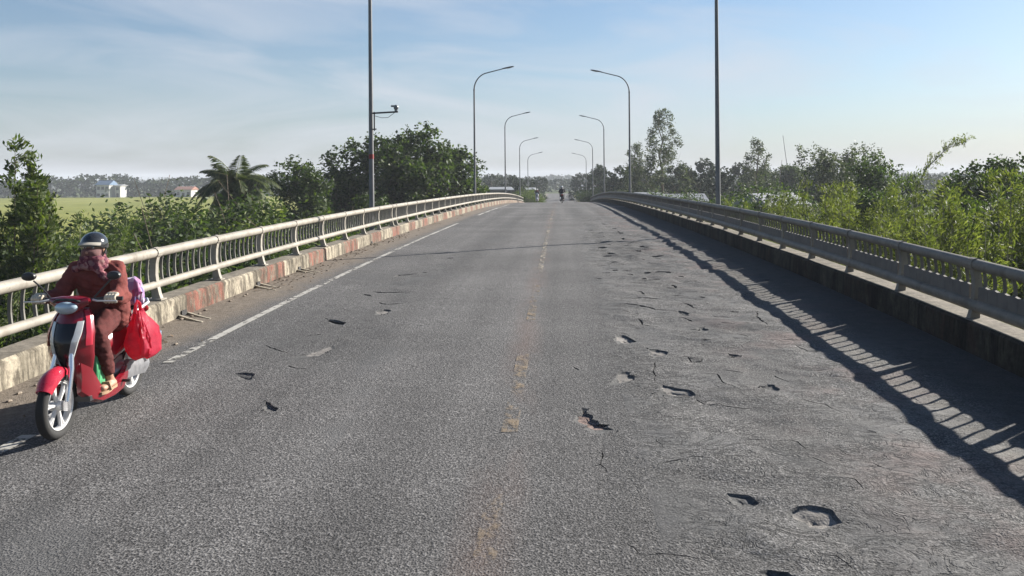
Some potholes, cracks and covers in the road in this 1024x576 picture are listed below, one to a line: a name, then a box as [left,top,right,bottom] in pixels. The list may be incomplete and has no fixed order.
pothole [613,335,636,344]
pothole [652,385,696,397]
pothole [610,370,637,385]
pothole [235,372,255,382]
crack [628,544,710,562]
pothole [786,504,843,531]
pothole [647,348,669,358]
pothole [573,408,619,434]
pothole [727,493,759,508]
